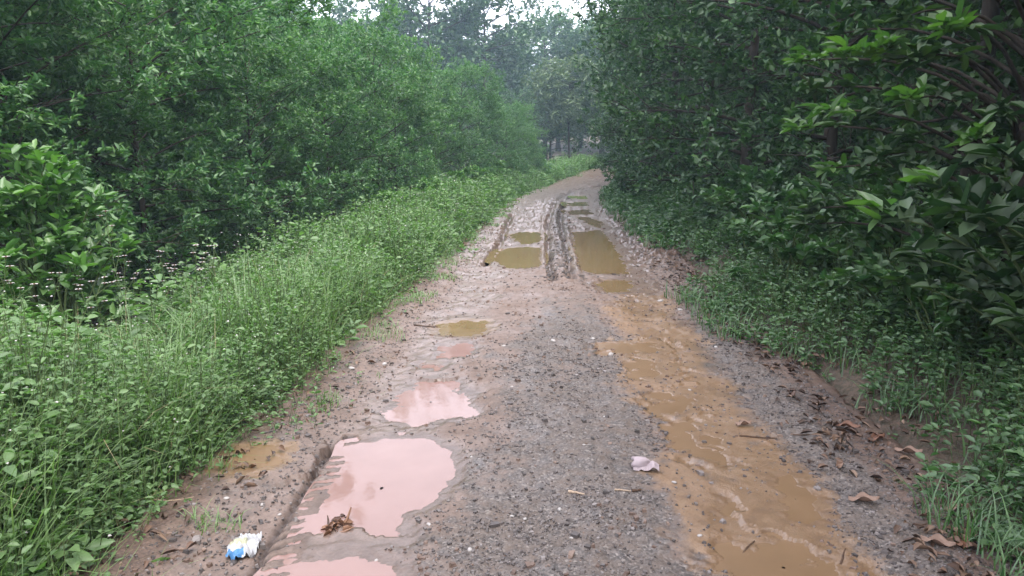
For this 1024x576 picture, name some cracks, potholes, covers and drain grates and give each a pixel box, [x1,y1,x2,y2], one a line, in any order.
pothole [484,245,550,269]
pothole [568,229,634,274]
pothole [432,318,500,338]
pothole [287,432,466,554]
pothole [214,441,300,477]
pothole [375,376,487,429]
